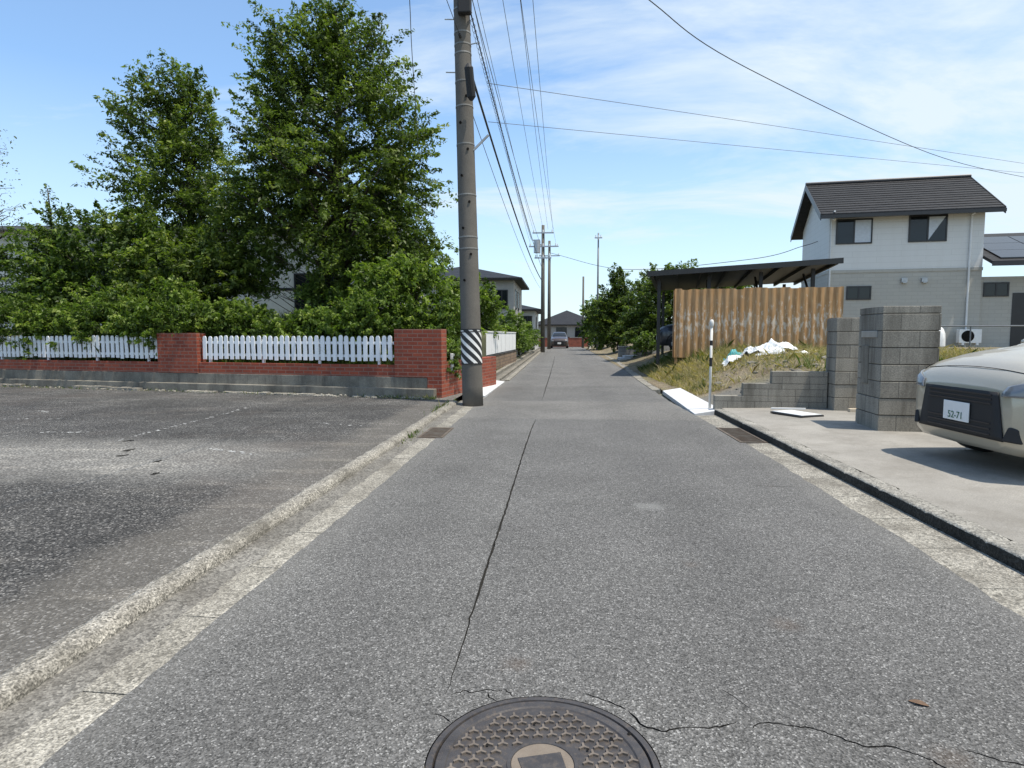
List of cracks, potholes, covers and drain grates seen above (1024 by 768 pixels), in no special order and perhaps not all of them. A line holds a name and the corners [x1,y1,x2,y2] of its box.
crack [963,749,1024,766]
manhole cover [425,697,661,768]
crack [455,689,514,704]
crack [585,689,946,768]
